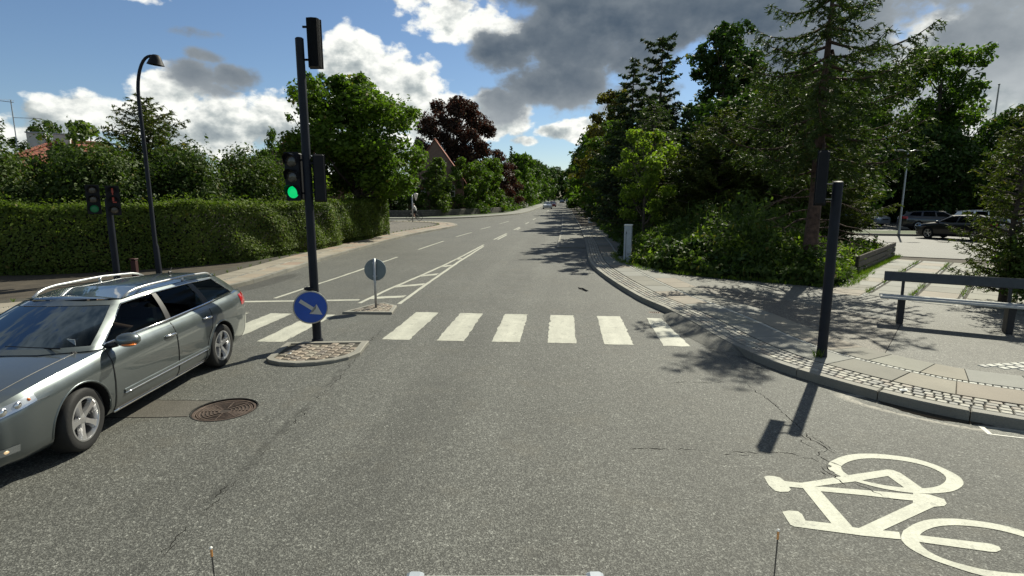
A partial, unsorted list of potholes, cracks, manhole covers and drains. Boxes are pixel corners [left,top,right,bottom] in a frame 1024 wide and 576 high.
crack [634,385,904,502]
manhole cover [189,398,259,421]
